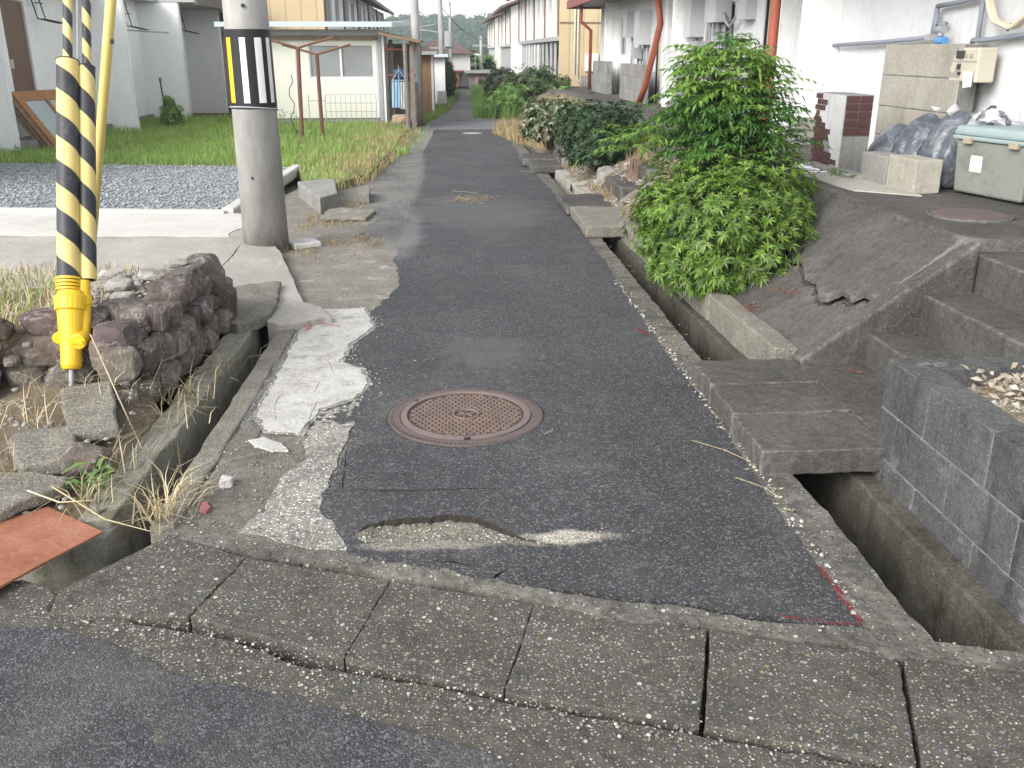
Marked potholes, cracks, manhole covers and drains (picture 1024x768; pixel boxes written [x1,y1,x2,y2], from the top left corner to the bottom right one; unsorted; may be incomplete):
pothole [354,514,552,547]
manhole cover [926,208,1014,223]
crack [420,557,506,583]
manhole cover [388,387,543,447]
crack [342,437,495,492]
